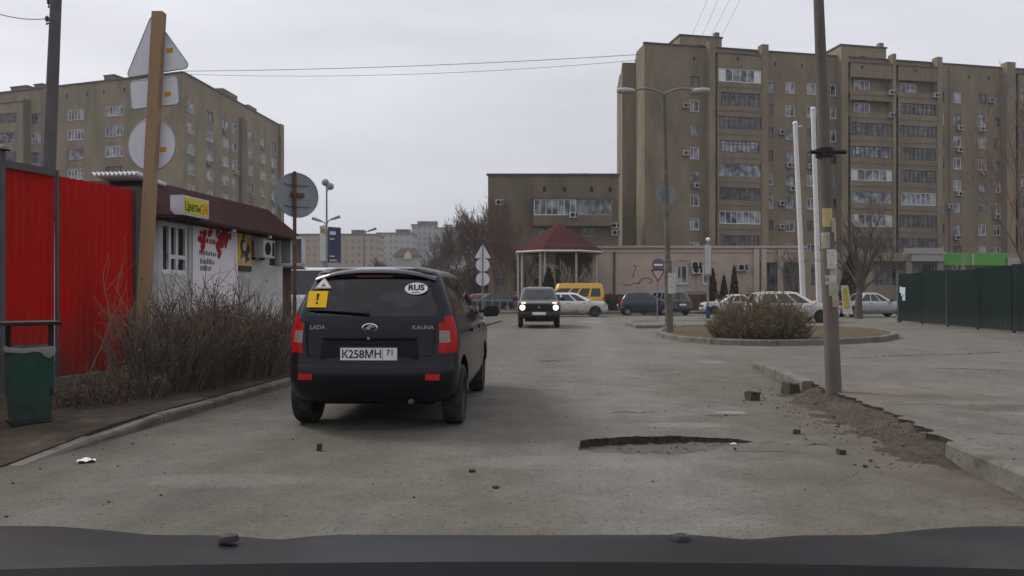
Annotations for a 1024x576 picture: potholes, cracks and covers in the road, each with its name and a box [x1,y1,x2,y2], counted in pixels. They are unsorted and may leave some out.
pothole [578,436,753,455]
